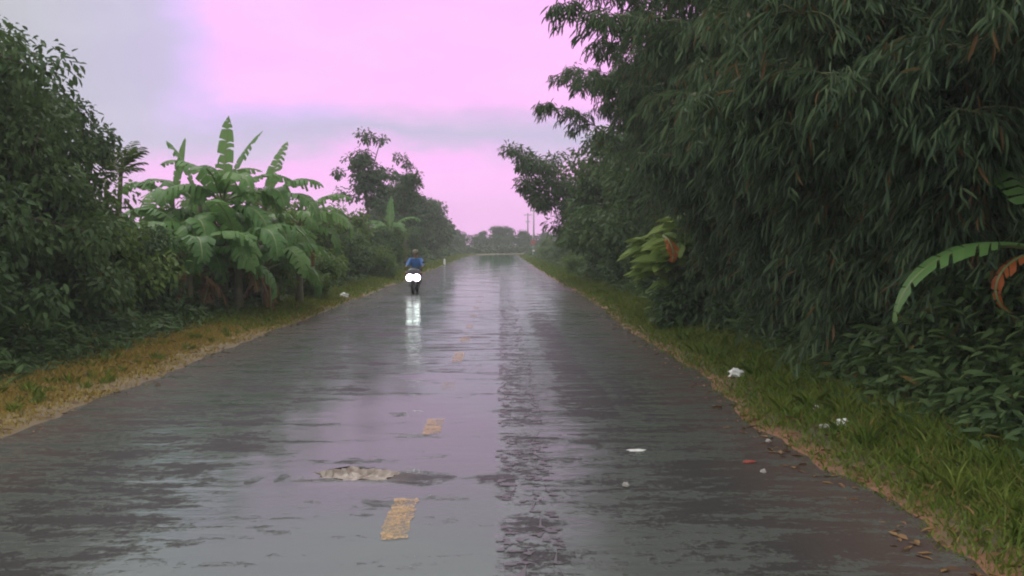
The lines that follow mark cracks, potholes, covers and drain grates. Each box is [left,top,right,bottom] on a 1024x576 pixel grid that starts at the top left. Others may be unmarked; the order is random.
crack [495,272,566,576]
pothole [314,466,400,480]
